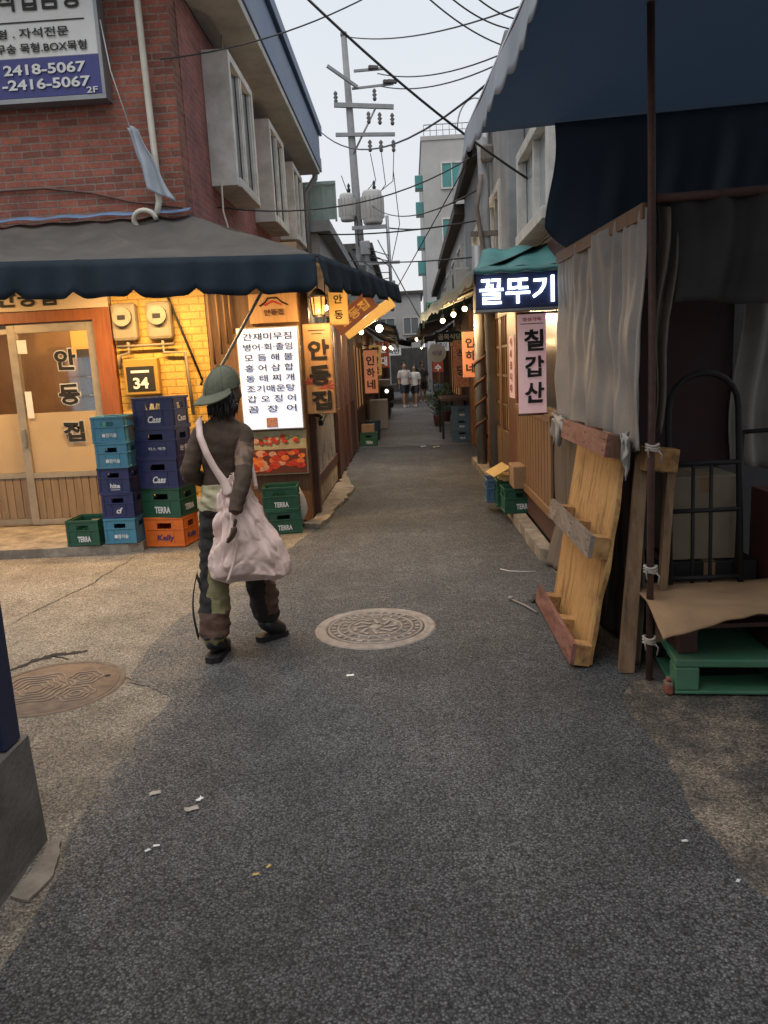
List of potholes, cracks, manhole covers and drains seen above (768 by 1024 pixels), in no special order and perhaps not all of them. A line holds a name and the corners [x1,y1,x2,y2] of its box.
manhole cover [11,661,126,718]
manhole cover [315,608,436,650]
crack [10,650,88,671]
